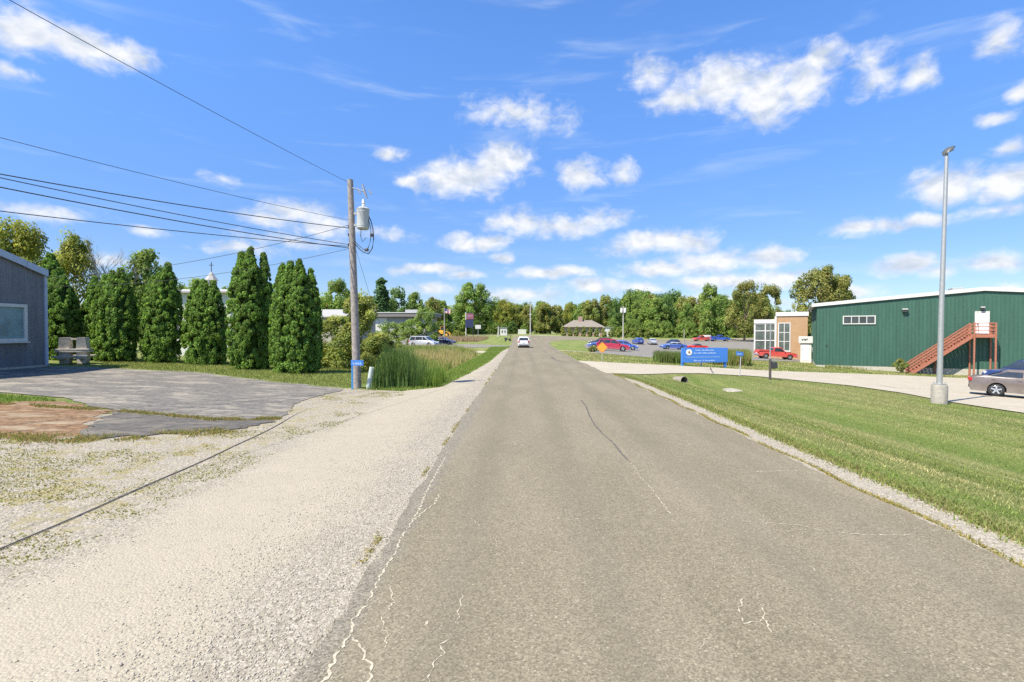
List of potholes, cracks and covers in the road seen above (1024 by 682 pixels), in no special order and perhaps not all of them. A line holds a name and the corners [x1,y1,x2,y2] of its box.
crack [425,595,463,682]
crack [321,458,445,682]
crack [738,592,772,632]
crack [734,519,916,536]
